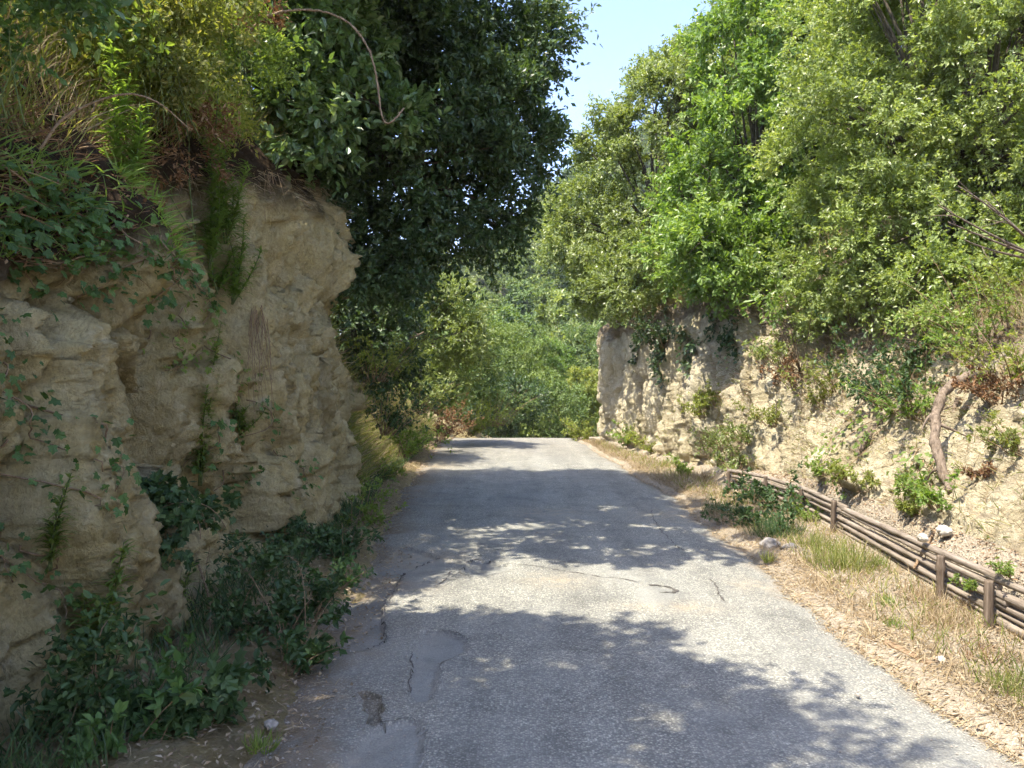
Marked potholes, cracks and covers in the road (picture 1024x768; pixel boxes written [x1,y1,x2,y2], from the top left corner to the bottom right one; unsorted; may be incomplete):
crack [363,558,679,650]
crack [408,629,464,693]
pothole [347,686,400,740]
